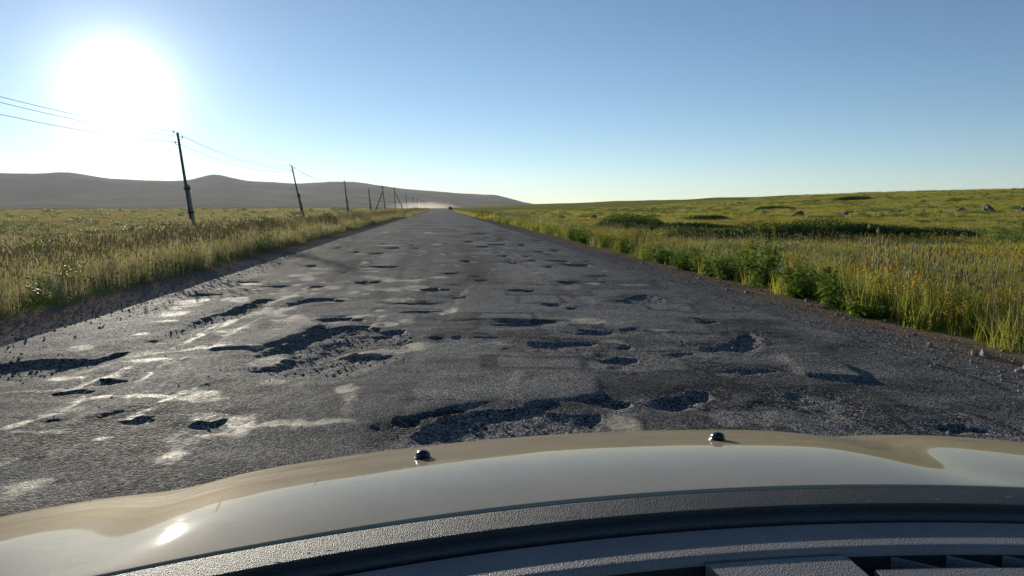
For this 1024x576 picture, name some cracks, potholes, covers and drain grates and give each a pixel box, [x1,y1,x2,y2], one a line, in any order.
pothole [598,400,635,413]
pothole [614,294,669,306]
pothole [390,406,609,449]
pothole [0,352,131,384]
pothole [83,378,129,388]
pothole [523,341,598,352]
pothole [924,424,1007,437]
pothole [185,418,229,434]
pothole [645,391,716,413]
pothole [116,416,157,427]
pothole [695,333,765,357]
pothole [597,357,640,369]
